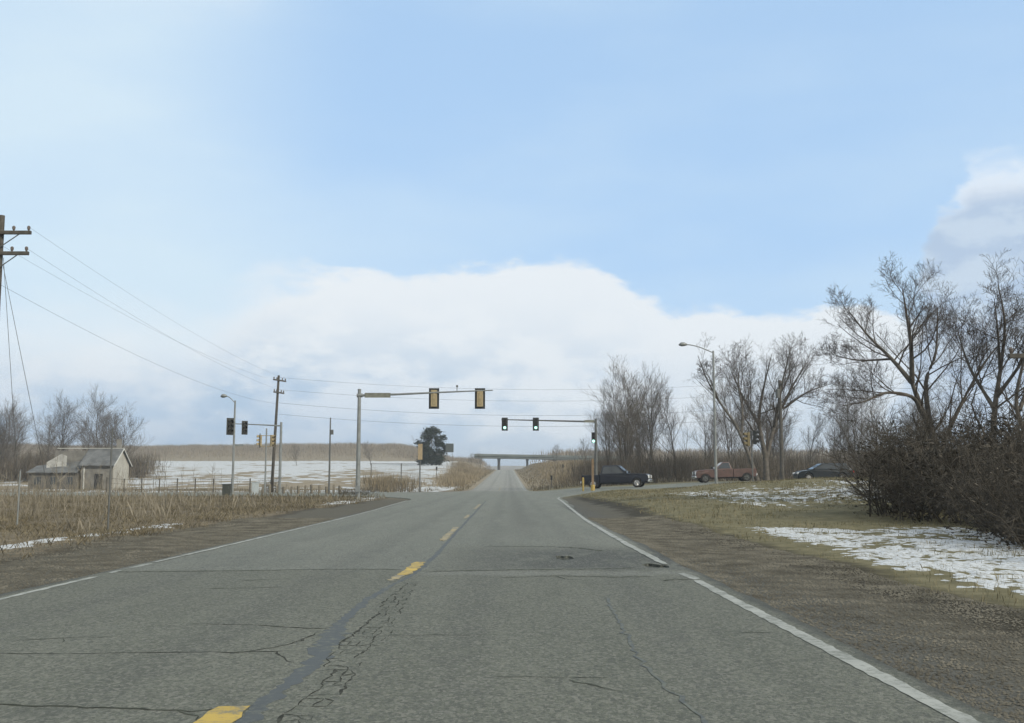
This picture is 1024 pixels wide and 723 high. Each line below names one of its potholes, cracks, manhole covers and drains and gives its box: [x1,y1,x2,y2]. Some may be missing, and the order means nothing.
crack [277,583,416,723]
crack [569,597,708,723]
crack [0,624,315,662]
